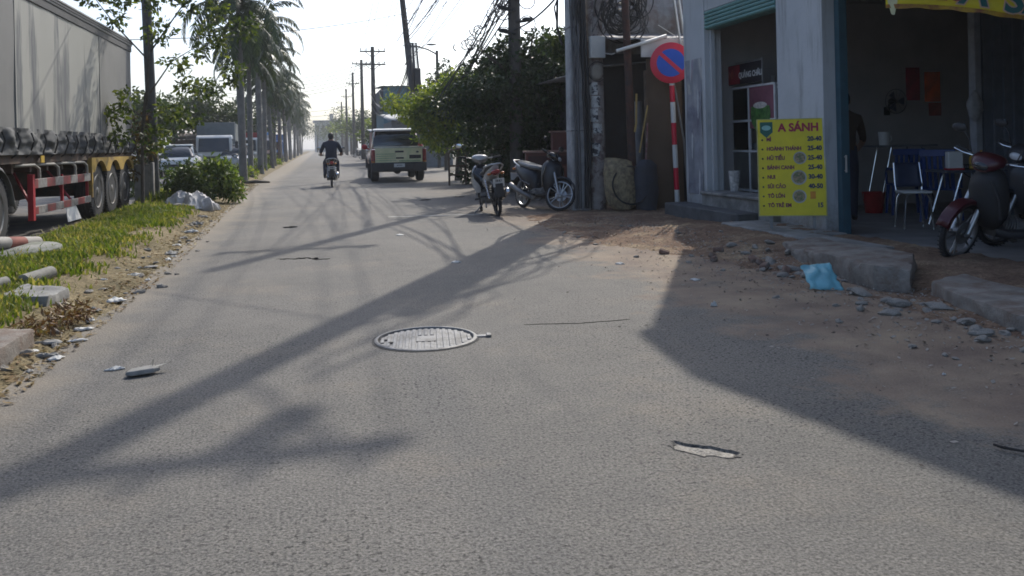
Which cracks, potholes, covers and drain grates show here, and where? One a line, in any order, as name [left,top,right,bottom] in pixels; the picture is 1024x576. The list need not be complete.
manhole cover [372,326,491,352]
pothole [666,440,744,458]
